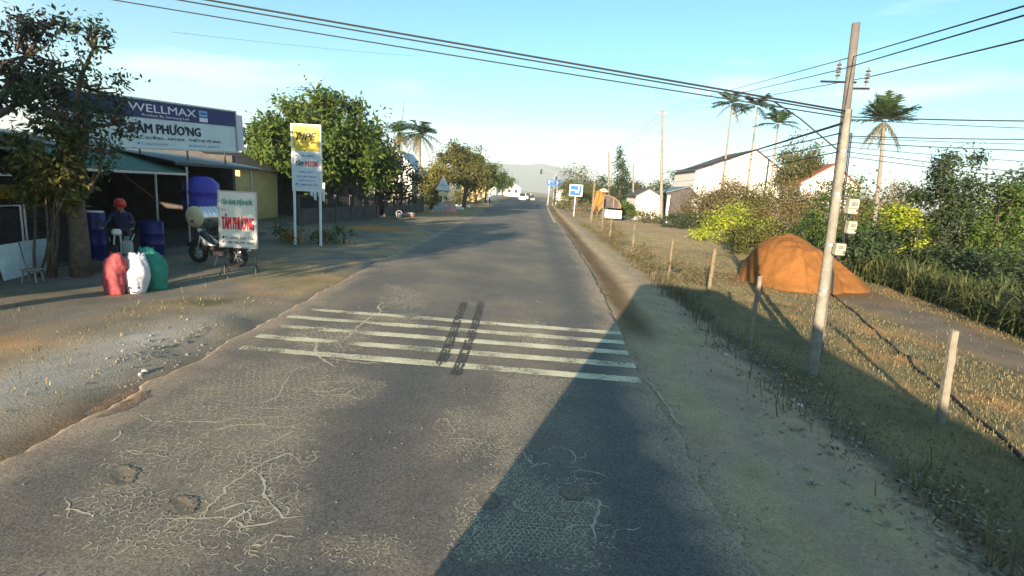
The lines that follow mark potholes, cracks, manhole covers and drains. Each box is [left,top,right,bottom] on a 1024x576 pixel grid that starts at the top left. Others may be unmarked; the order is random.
pothole [163,495,199,515]
pothole [103,465,141,485]
crack [52,285,433,572]
crack [431,373,639,571]
pothole [477,493,502,508]
pothole [560,484,586,501]
pothole [84,387,151,418]
